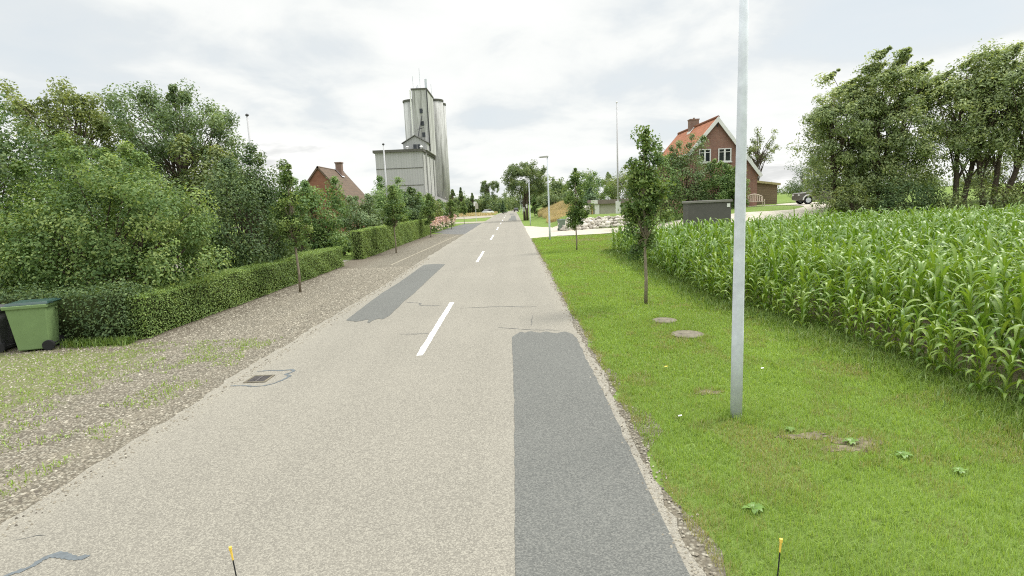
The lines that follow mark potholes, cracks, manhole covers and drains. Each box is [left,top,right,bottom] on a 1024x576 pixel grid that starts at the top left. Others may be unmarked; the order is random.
manhole cover [671,330,704,340]
drain grate [243,374,275,383]
